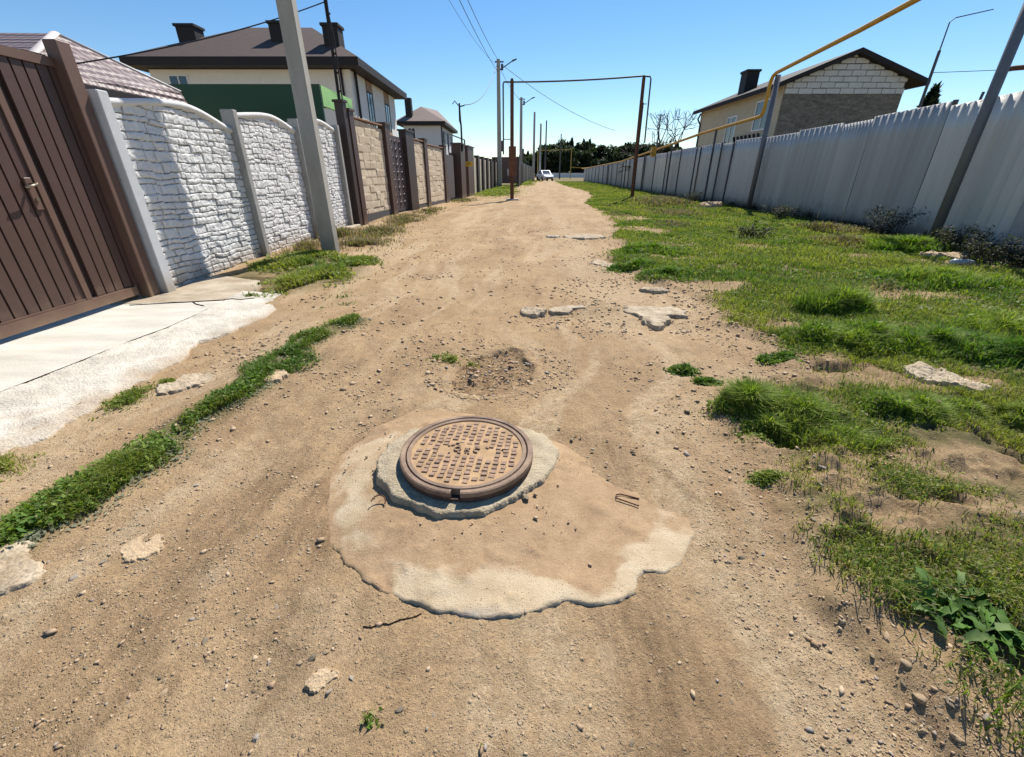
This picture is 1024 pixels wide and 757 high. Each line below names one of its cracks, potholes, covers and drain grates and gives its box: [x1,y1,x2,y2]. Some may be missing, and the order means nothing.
crack [363,613,422,628]
pothole [441,345,544,400]
manhole cover [376,416,560,520]
